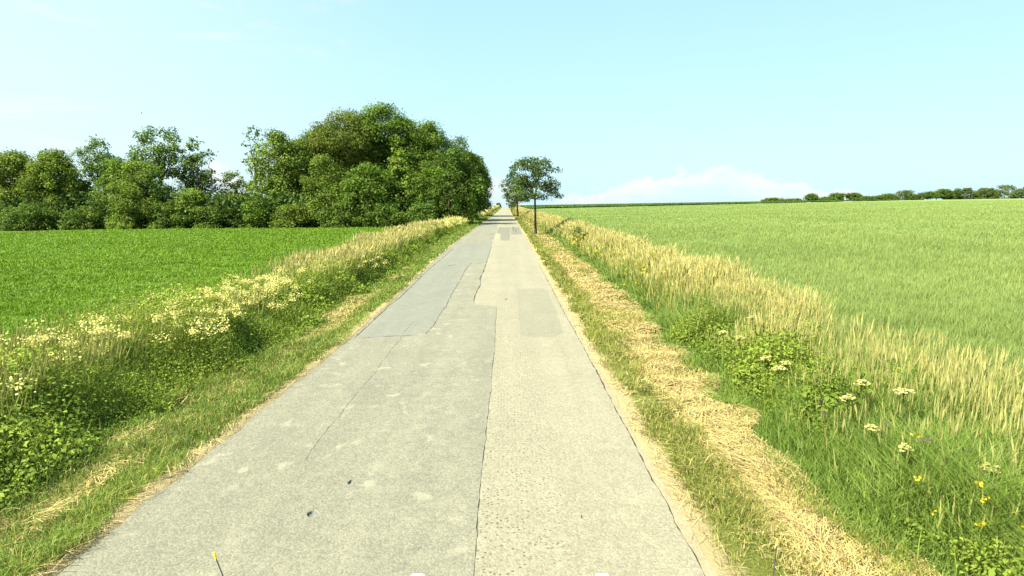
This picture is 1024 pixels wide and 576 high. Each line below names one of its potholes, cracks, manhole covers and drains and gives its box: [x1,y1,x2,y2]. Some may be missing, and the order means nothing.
crack [306,249,484,459]
